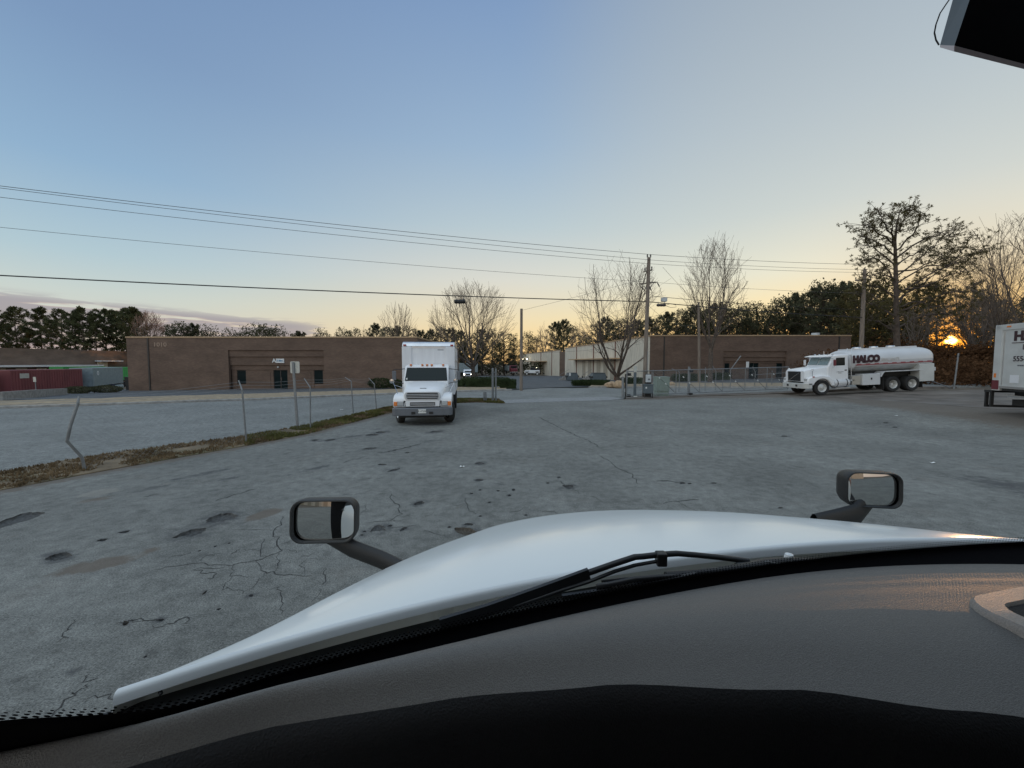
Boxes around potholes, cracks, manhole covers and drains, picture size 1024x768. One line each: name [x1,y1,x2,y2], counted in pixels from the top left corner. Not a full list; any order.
pothole [205,513,238,523]
crack [51,674,112,717]
crack [539,417,637,483]
crack [156,517,329,612]
pothole [455,527,476,536]
crack [116,616,190,628]
crack [360,494,452,538]
pothole [173,528,206,538]
pothole [45,552,72,561]
